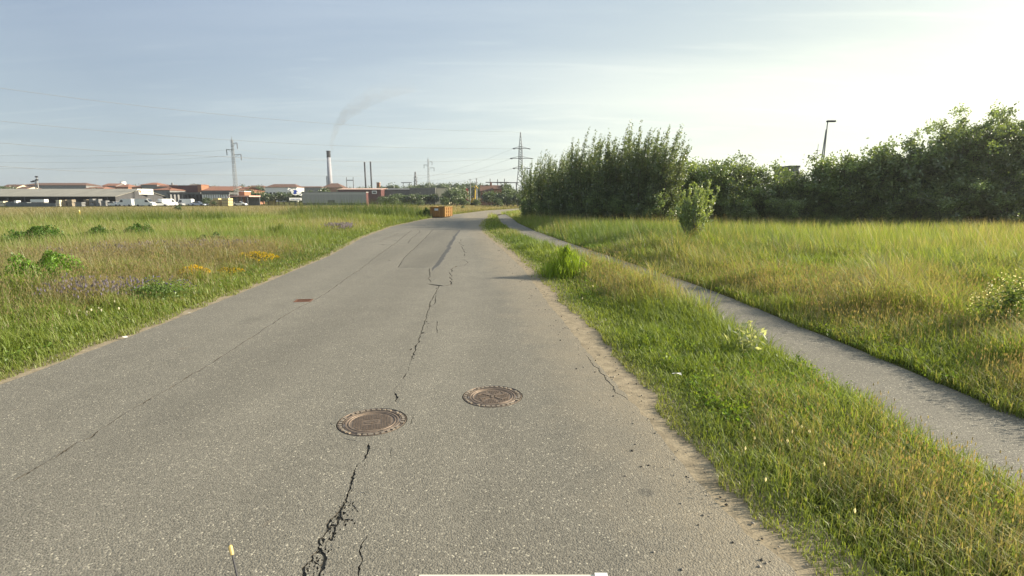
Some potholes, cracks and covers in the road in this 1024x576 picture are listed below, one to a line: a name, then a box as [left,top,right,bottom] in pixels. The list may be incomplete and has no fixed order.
manhole cover [462,386,523,408]
crack [301,408,370,576]
crack [394,244,468,403]
manhole cover [336,408,407,436]
